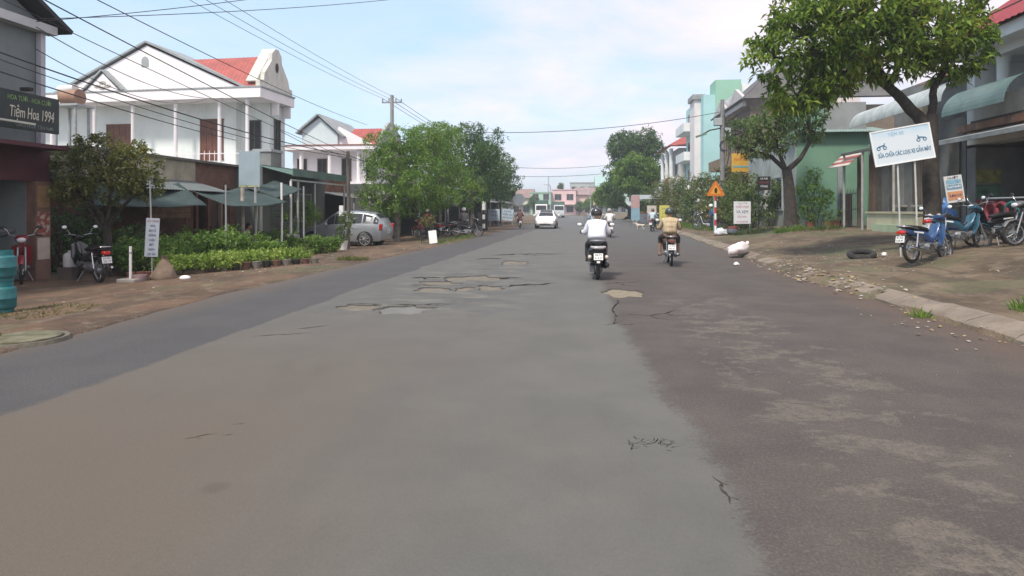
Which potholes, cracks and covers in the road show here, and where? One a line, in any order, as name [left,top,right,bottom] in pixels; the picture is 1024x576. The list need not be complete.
manhole cover [0,330,72,349]
pothole [373,306,435,314]
